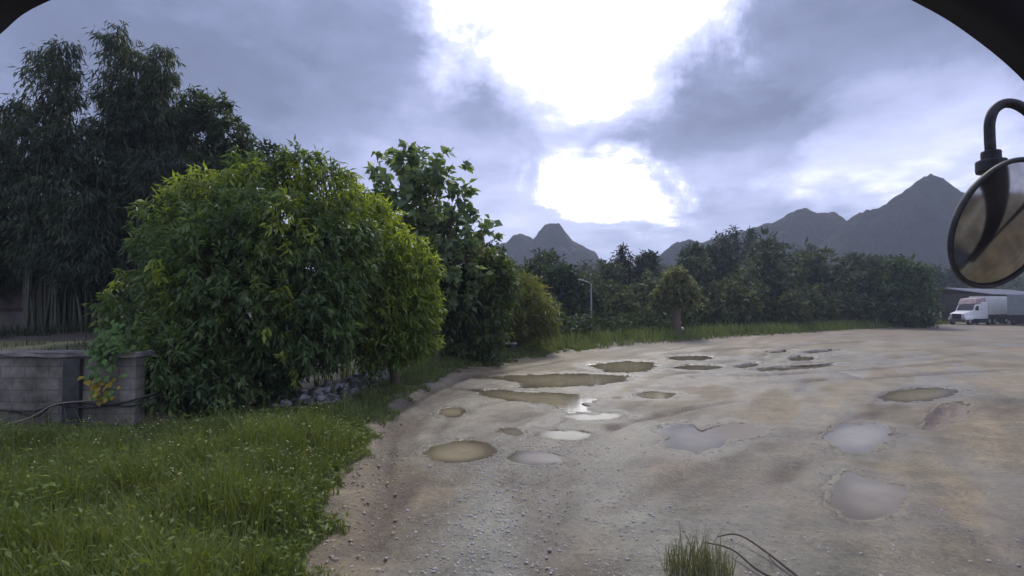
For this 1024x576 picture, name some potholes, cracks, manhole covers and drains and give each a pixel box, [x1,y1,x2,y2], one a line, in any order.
pothole [434,405,468,418]
pothole [917,401,975,431]
pothole [560,411,628,421]
pothole [495,427,528,437]
pothole [581,360,664,373]
pothole [667,363,729,371]
pothole [817,421,898,455]
pothole [870,386,966,403]
pothole [501,447,574,467]
pothole [528,429,597,441]
pothole [475,372,637,389]
pothole [414,437,503,465]
